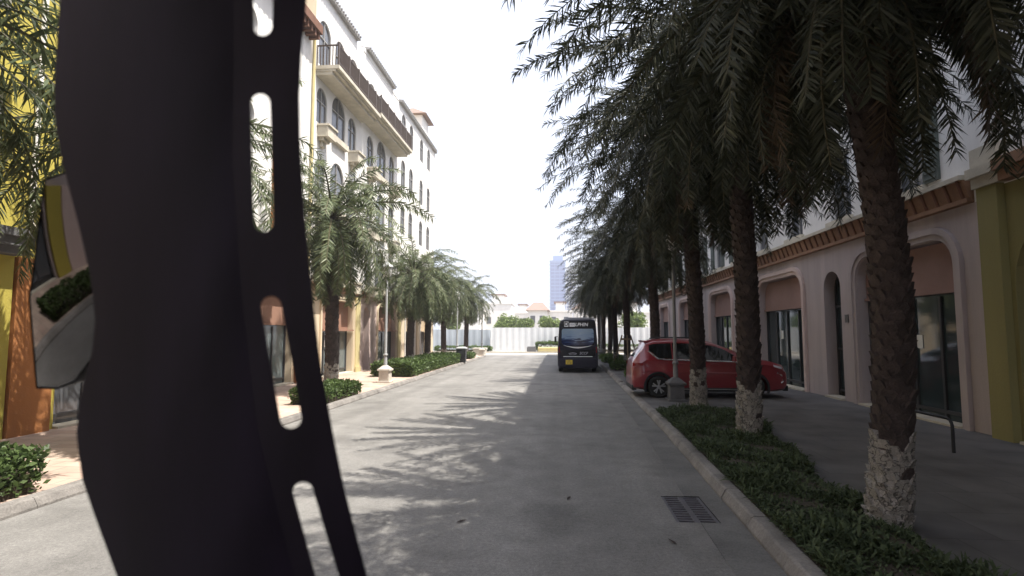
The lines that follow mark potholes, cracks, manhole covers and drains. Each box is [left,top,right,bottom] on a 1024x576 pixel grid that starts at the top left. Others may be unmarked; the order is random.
drain grate [661,496,725,559]
